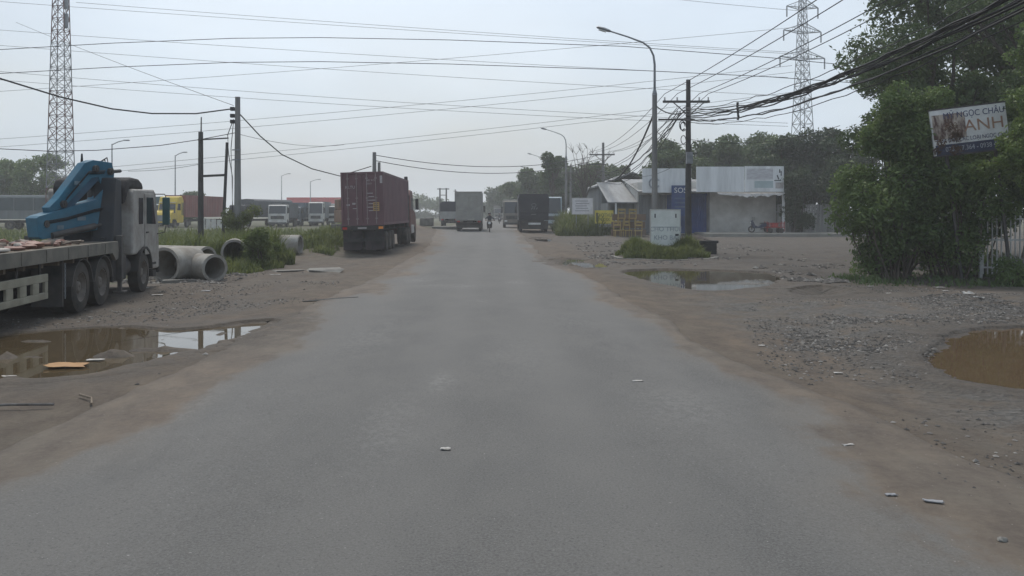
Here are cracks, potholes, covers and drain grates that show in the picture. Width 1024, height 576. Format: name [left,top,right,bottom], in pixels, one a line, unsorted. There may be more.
pothole [766,283,876,298]
pothole [875,322,1024,399]
pothole [608,267,796,293]
pothole [0,316,303,386]
